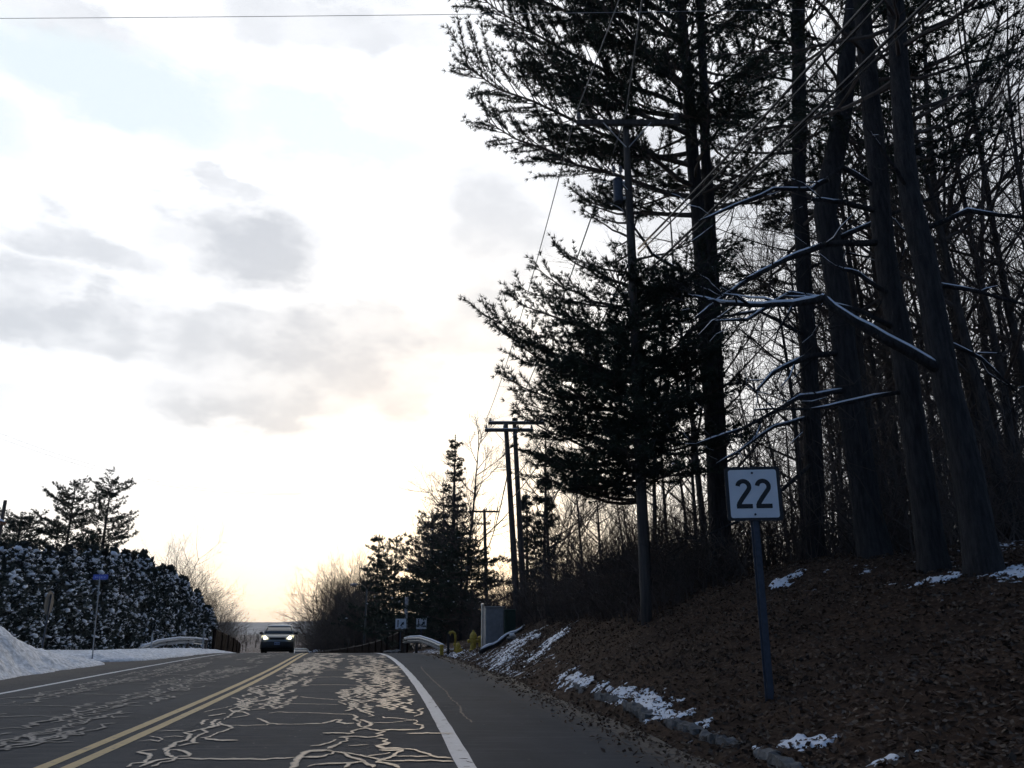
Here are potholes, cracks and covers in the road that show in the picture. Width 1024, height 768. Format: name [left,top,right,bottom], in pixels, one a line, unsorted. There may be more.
crack [0,653,473,768]
